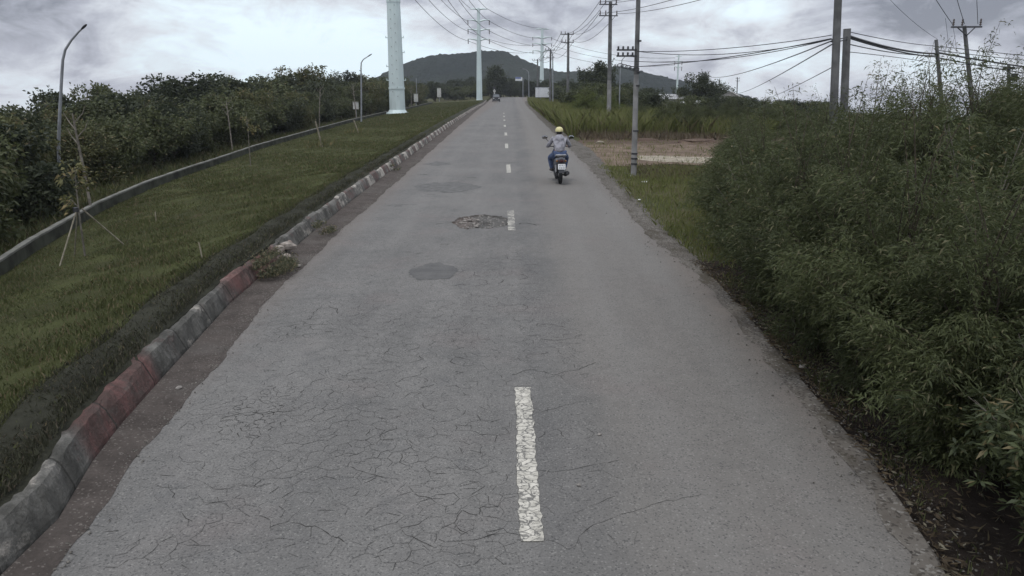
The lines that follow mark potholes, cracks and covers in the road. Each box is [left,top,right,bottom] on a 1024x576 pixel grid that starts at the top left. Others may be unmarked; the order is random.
pothole [452,214,508,229]
crack [58,231,548,570]
crack [534,401,698,549]
crack [512,319,596,378]
